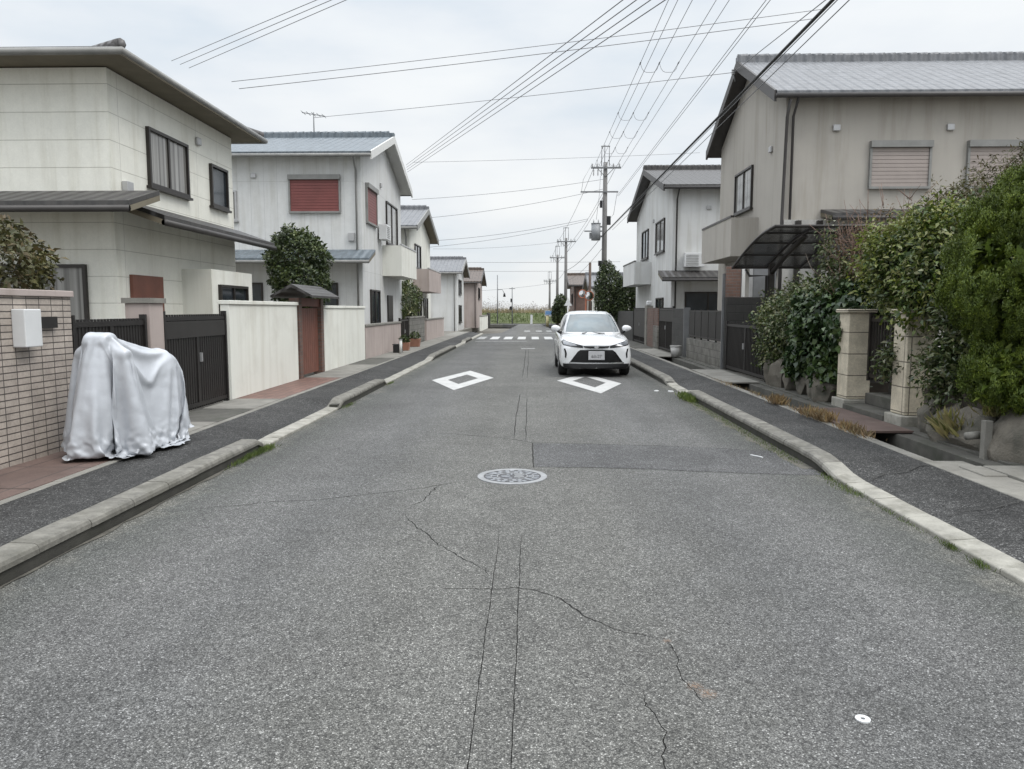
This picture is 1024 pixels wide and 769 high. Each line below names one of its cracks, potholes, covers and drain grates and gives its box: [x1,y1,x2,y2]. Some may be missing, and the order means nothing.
crack [224,482,455,507]
crack [643,693,667,769]
manhole cover [477,469,547,485]
crack [407,519,650,637]
